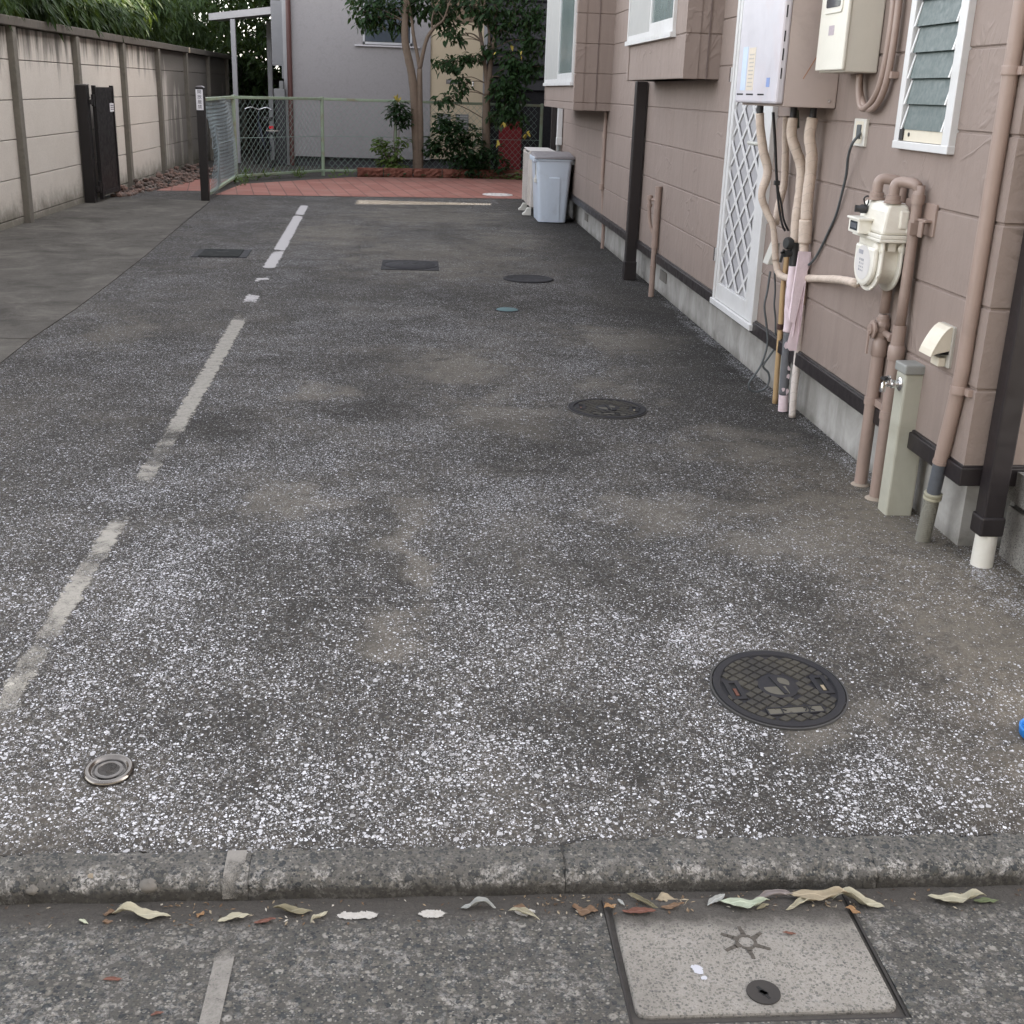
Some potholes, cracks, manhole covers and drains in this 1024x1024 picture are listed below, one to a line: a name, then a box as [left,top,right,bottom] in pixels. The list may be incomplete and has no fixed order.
manhole cover [191,249,252,258]
manhole cover [503,274,553,283]
manhole cover [381,260,439,271]
manhole cover [709,650,849,731]
manhole cover [567,398,647,419]
